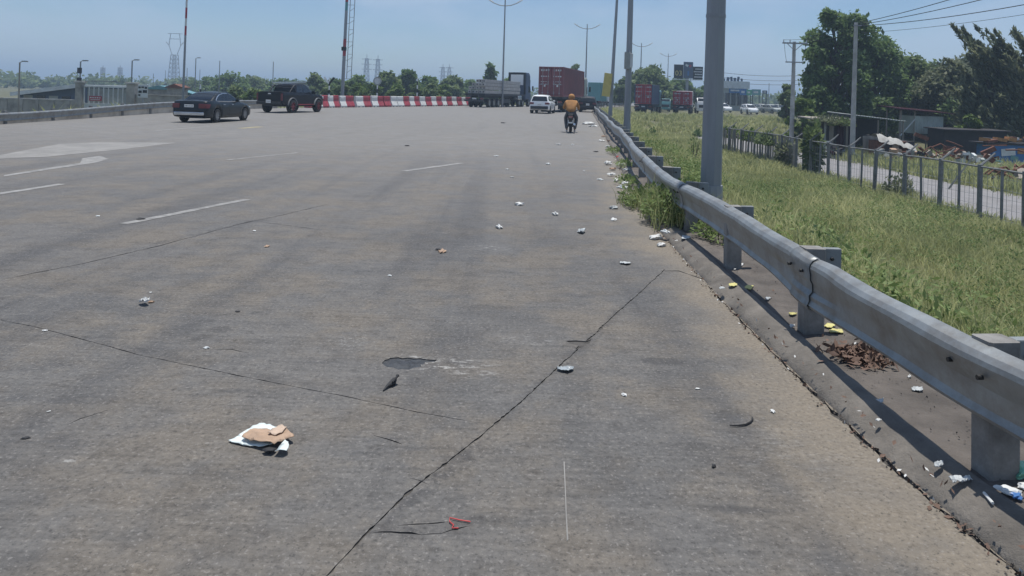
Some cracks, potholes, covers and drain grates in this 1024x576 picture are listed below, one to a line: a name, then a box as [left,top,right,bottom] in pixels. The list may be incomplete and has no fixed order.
pothole [382,357,436,370]
crack [326,270,702,576]
crack [3,320,490,425]
